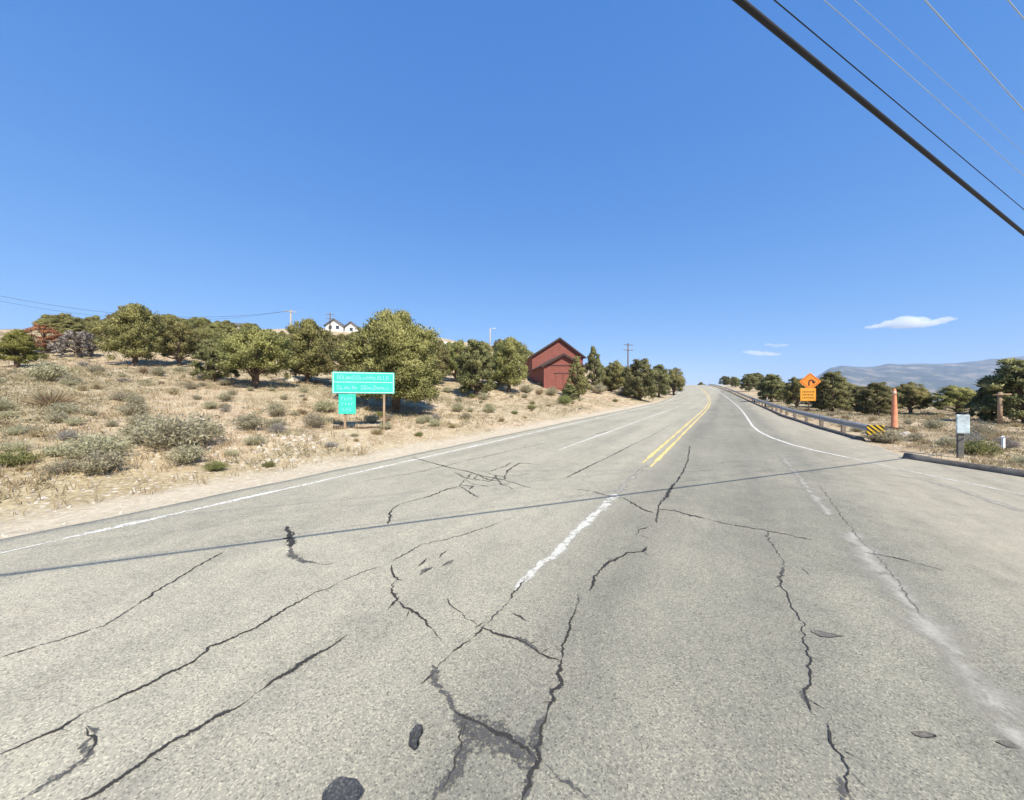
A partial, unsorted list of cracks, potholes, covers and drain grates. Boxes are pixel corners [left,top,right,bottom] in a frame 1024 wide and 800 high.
pothole [408,723,423,750]
crack [0,446,865,800]
pothole [322,776,364,800]
pothole [811,629,843,638]
pothole [996,740,1019,749]
